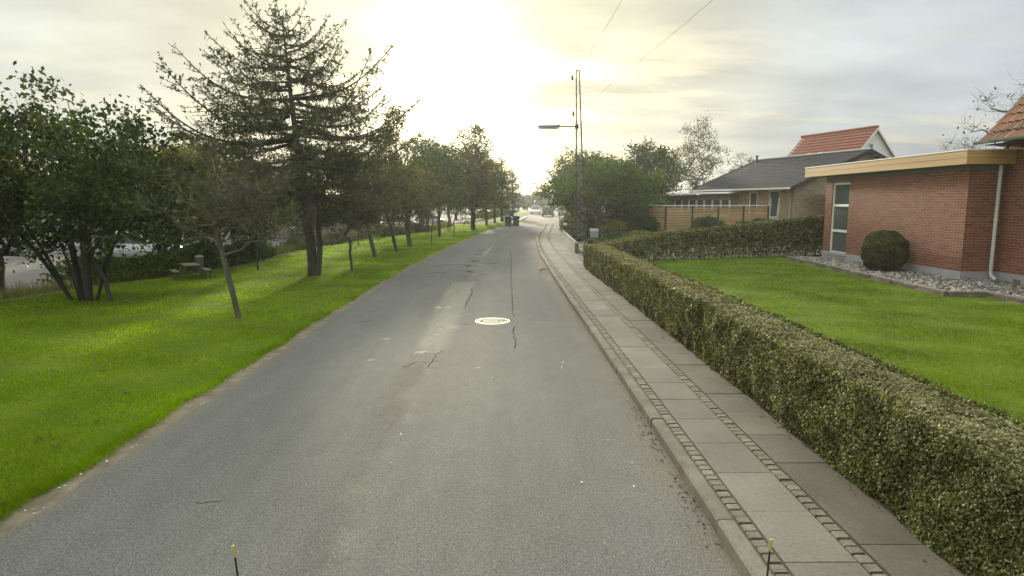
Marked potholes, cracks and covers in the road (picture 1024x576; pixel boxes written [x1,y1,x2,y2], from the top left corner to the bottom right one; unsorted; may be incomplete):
crack [423,250,517,349]
